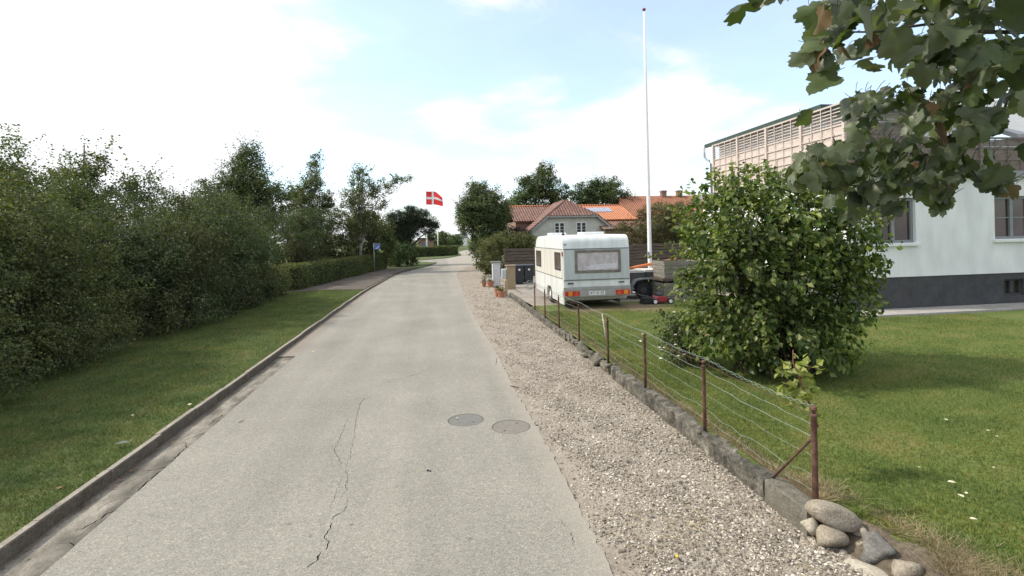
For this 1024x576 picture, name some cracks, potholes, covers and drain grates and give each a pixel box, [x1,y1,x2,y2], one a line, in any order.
manhole cover [448,414,484,426]
manhole cover [492,420,530,434]
crack [307,396,372,569]
